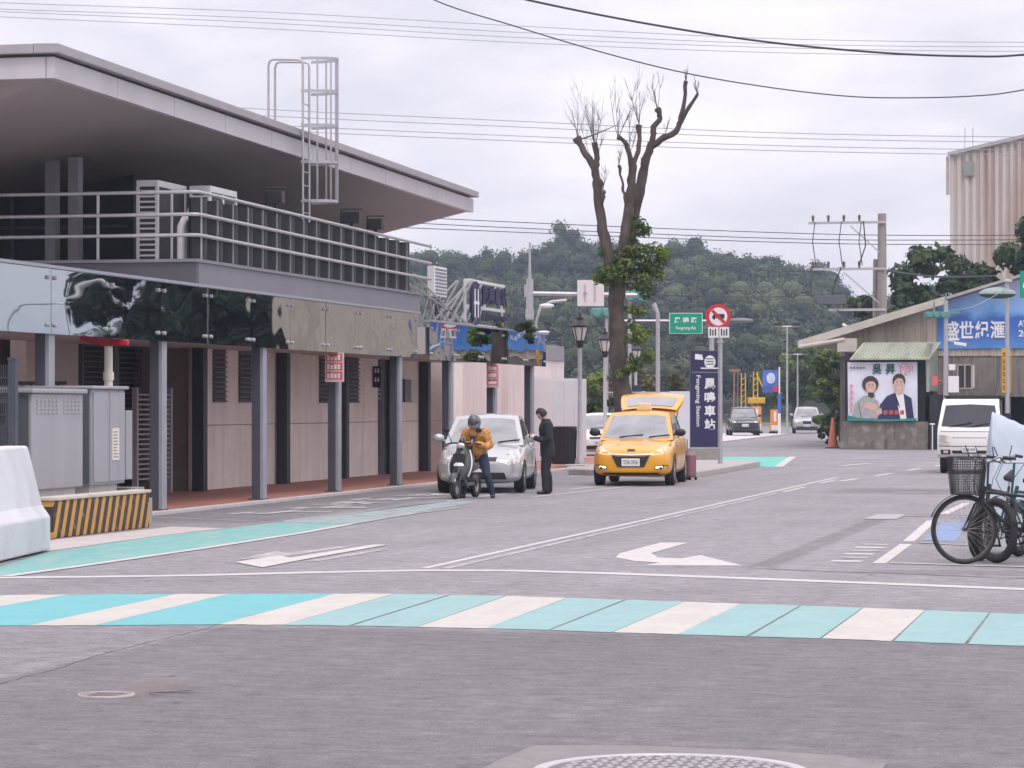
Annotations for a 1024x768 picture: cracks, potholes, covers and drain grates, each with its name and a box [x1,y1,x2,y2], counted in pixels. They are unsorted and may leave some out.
manhole cover [484,745,887,768]
